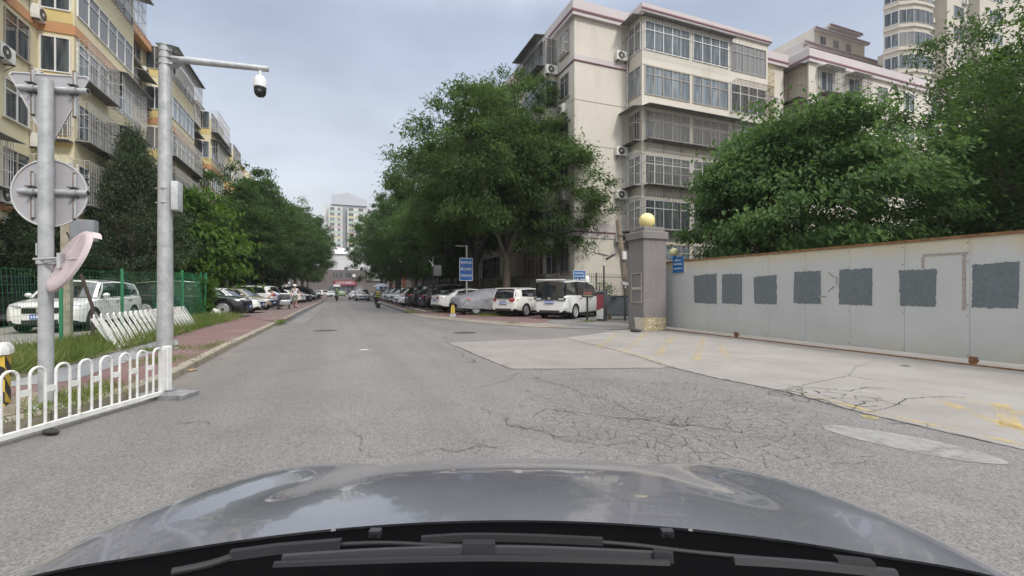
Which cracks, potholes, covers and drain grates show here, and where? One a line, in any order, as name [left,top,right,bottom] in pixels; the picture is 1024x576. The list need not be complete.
crack [384,367,886,477]
